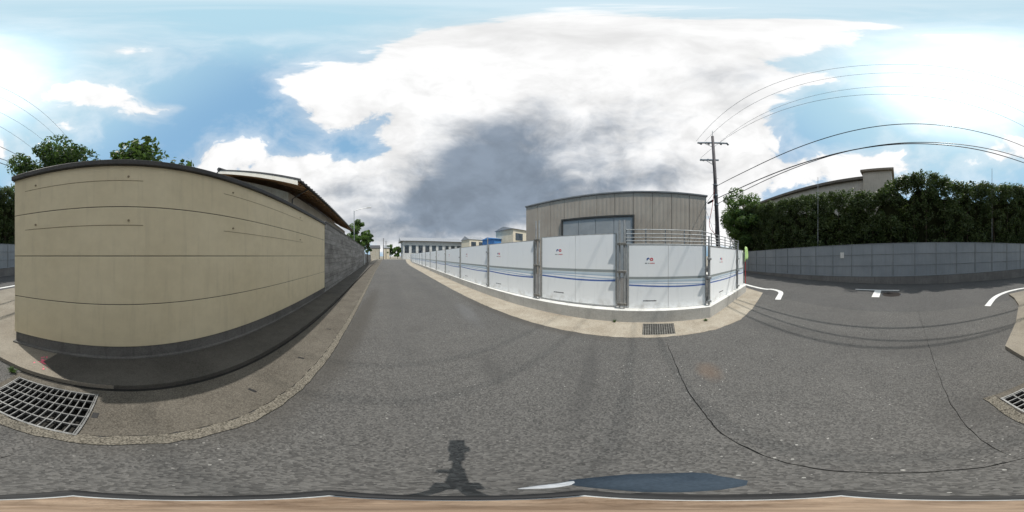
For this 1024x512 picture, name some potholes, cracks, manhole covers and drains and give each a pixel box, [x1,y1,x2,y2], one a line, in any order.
crack [1,309,1024,474]
drain grate [642,323,676,335]
